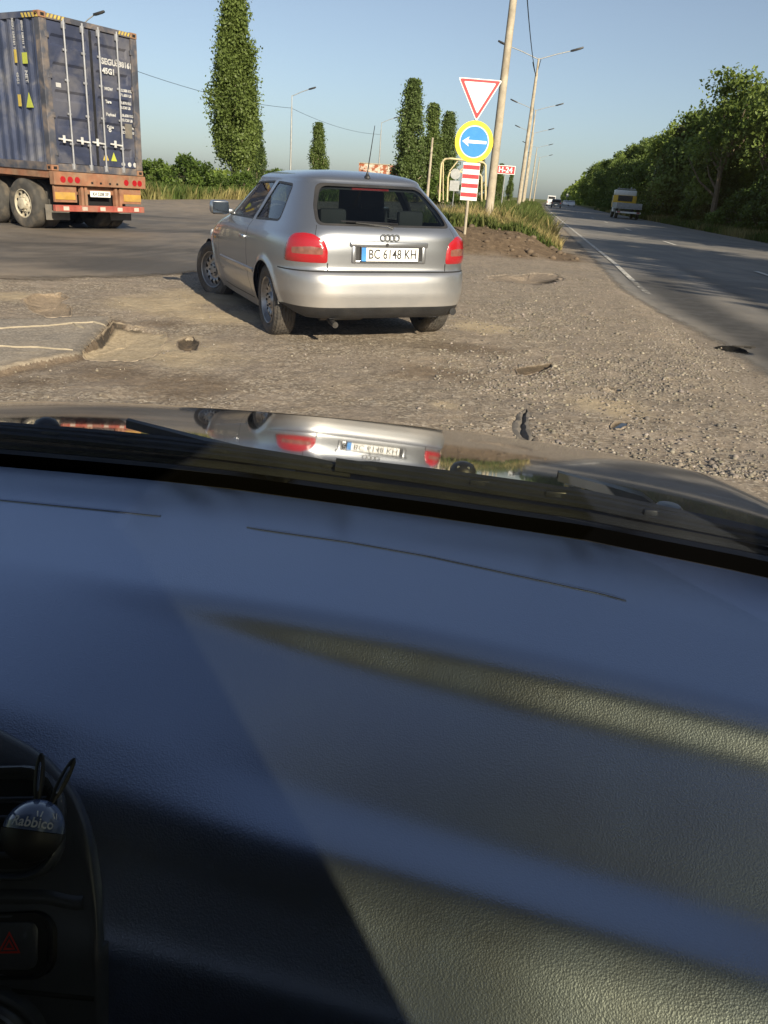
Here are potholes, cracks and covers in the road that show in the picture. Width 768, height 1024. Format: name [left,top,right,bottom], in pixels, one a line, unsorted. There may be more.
pothole [82,321,170,362]
pothole [512,409,534,441]
pothole [21,292,73,318]
pothole [715,346,748,354]
